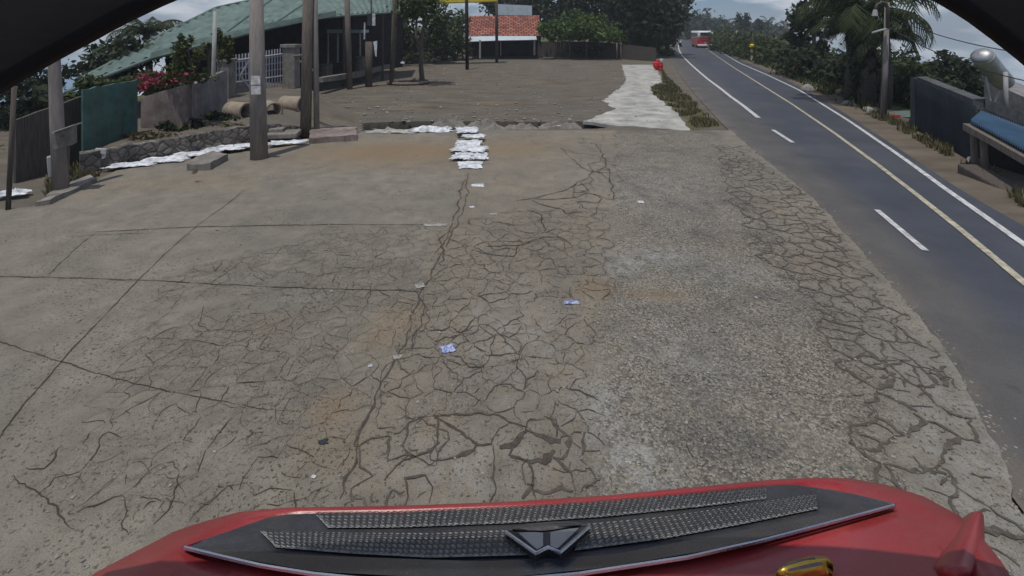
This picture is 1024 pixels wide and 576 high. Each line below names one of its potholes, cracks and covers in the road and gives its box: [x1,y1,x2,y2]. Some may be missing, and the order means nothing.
crack [345,134,626,506]
crack [0,192,444,538]
crack [716,146,1024,576]
